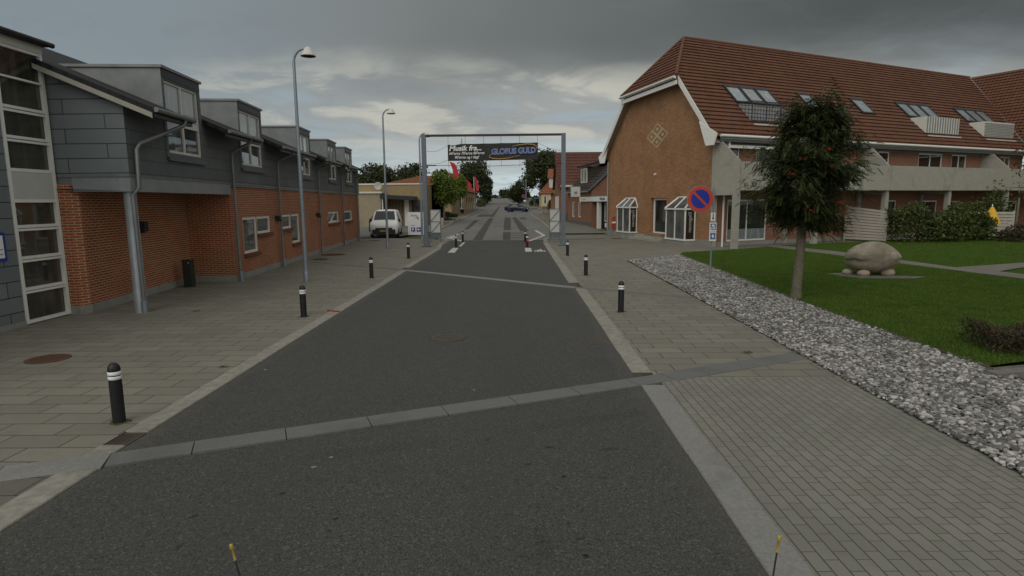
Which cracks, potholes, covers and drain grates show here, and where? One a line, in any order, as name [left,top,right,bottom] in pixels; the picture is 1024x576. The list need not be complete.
manhole cover [23,354,72,364]
manhole cover [427,333,468,343]
